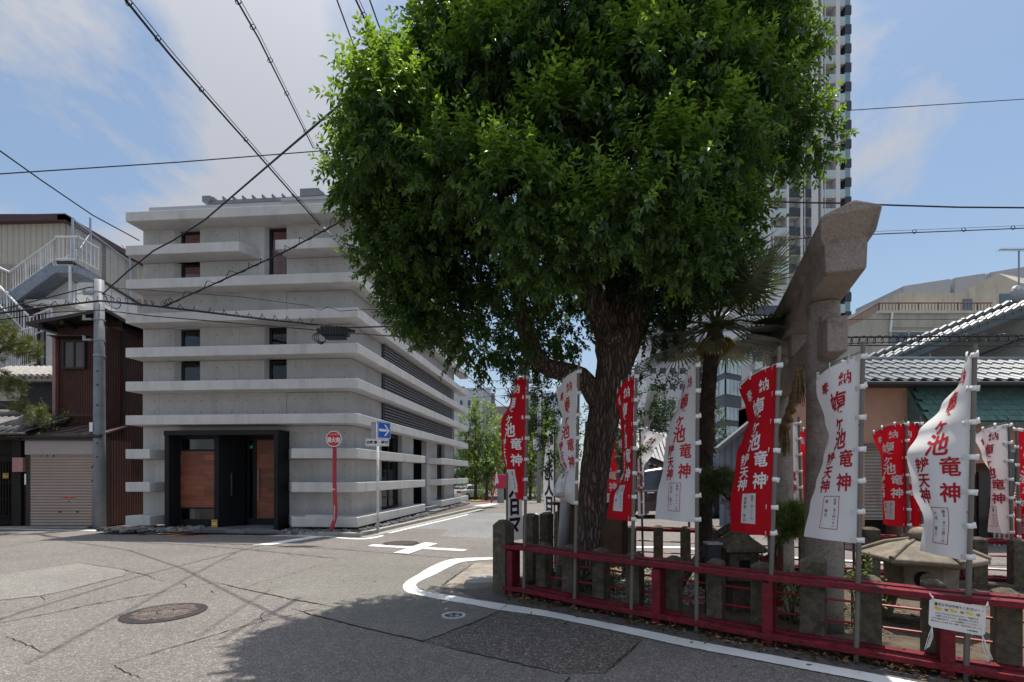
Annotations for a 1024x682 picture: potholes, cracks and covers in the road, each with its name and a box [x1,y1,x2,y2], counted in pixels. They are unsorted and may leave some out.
crack [110,582,570,682]
manhole cover [118,603,208,624]
